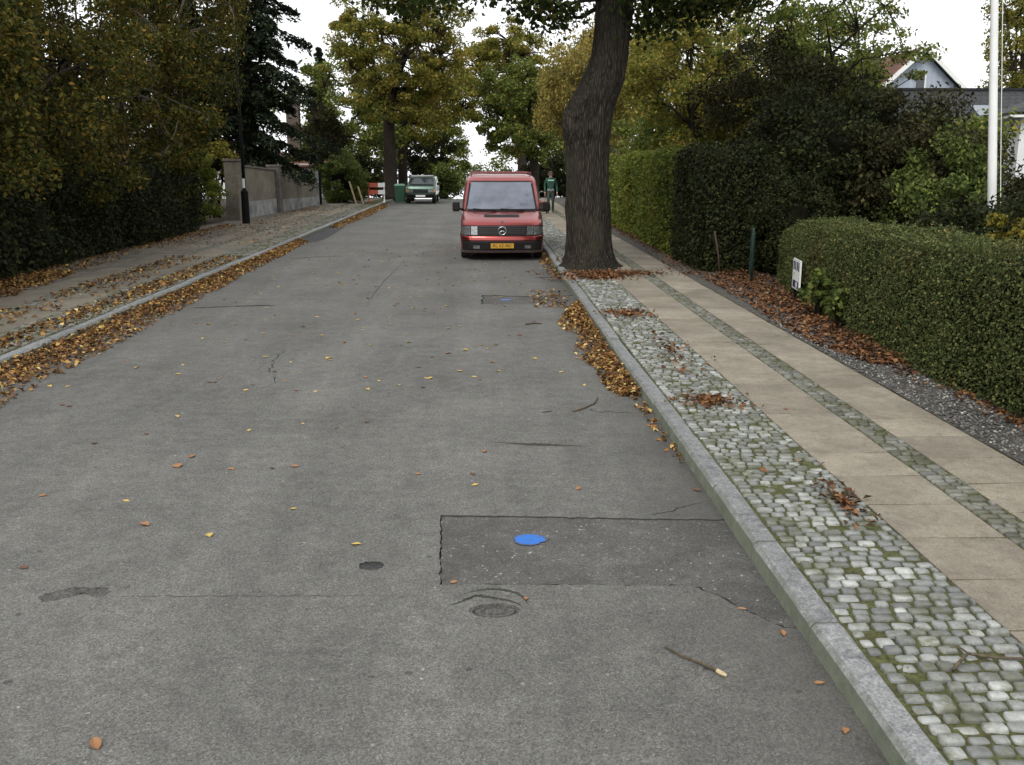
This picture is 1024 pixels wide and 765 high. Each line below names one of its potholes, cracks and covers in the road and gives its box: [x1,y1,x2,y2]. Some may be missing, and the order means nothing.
crack [449,588,529,608]
manhole cover [469,603,520,618]
pothole [359,561,384,570]
